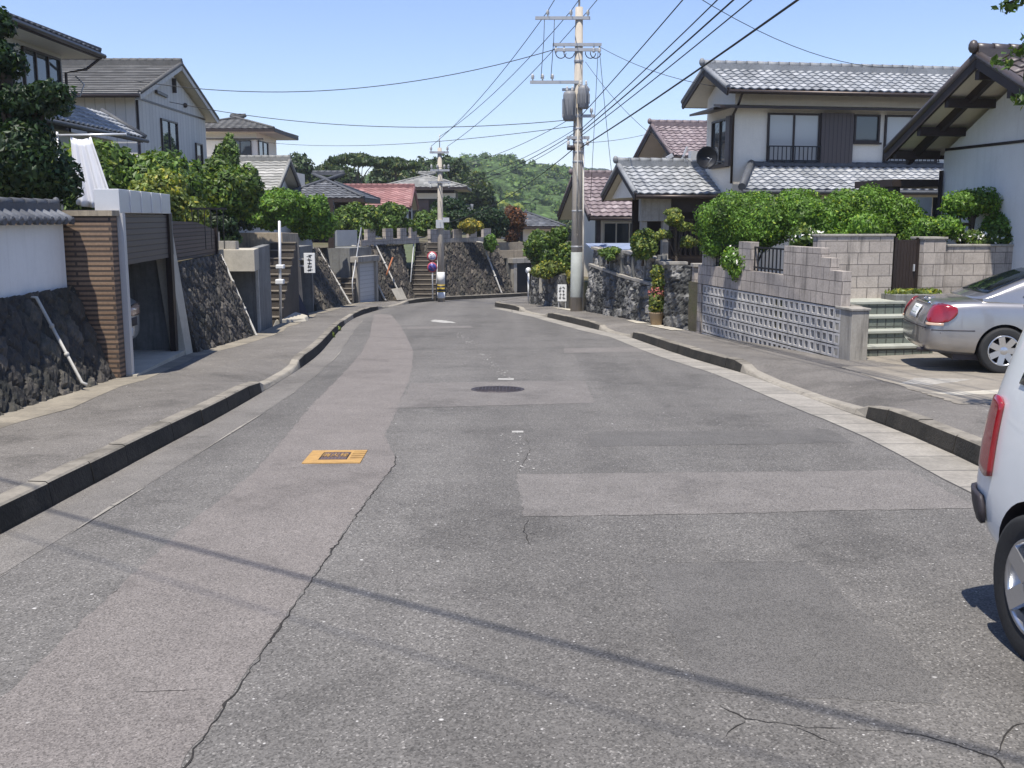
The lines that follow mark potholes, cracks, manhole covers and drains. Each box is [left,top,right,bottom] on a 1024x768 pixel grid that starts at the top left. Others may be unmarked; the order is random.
crack [719,705,1024,768]
crack [134,456,396,768]
manhole cover [302,450,368,464]
